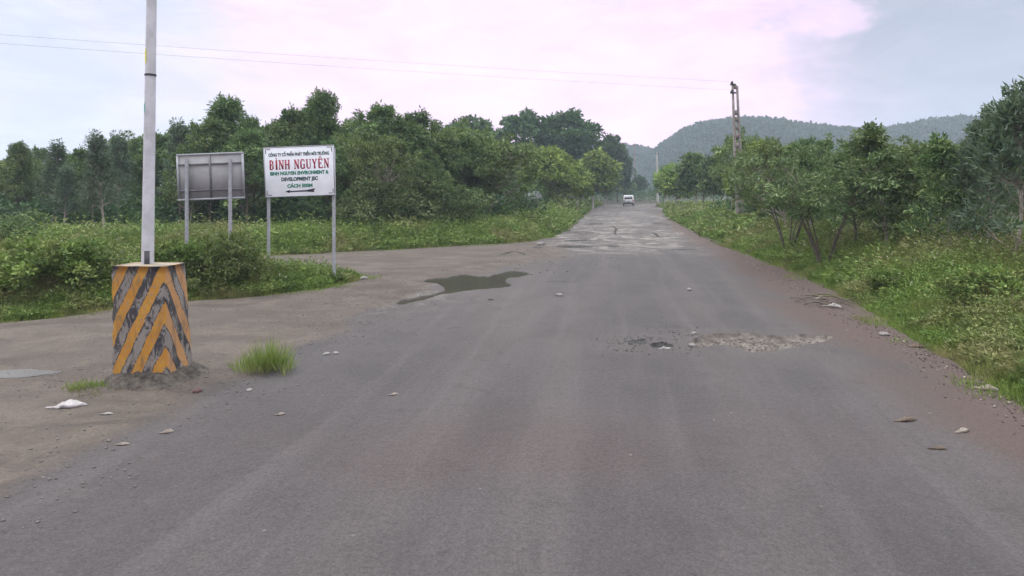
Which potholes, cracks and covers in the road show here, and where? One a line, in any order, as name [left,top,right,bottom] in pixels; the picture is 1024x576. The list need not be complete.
pothole [688,333,833,352]
pothole [626,338,648,346]
